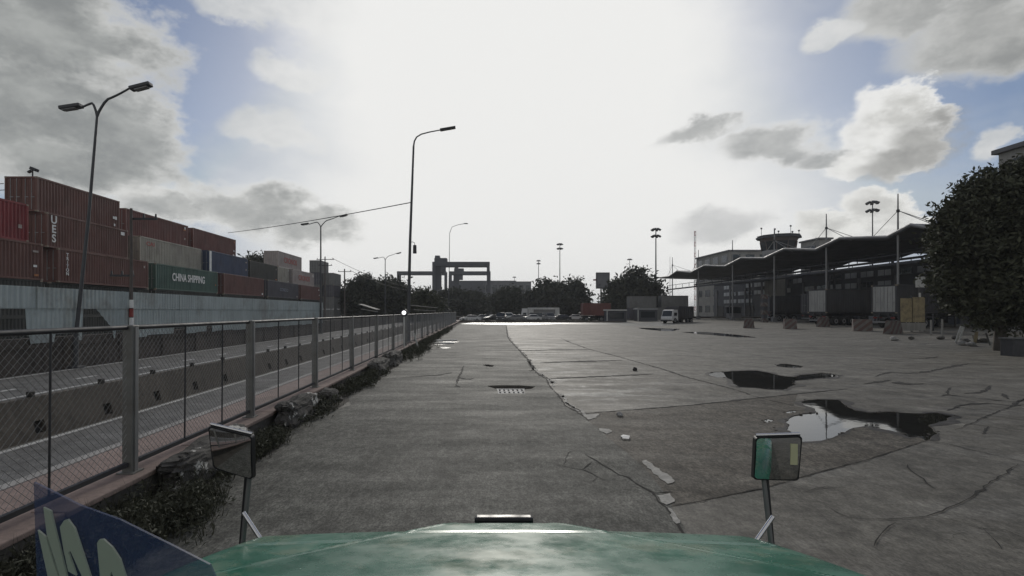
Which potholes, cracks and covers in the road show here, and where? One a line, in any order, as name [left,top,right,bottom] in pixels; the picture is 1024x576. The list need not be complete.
crack [864,356,1024,434]
crack [506,326,593,420]
crack [412,366,474,387]
pothole [705,370,843,390]
crack [788,464,1019,549]
pothole [776,399,963,443]
crack [551,452,685,534]
